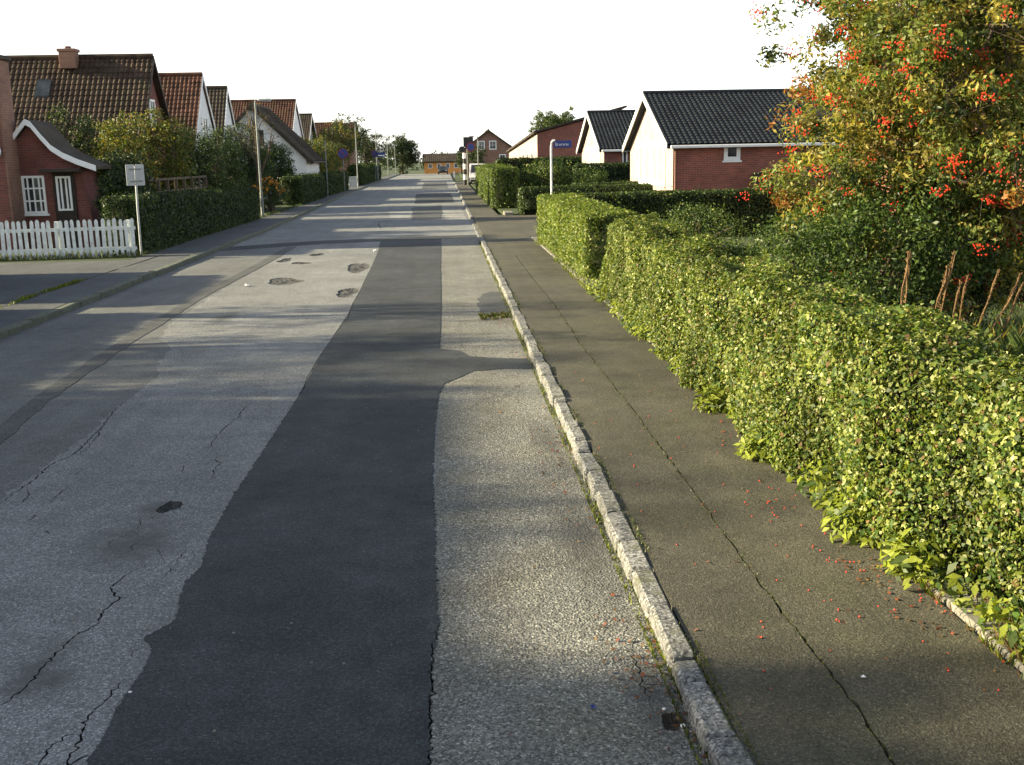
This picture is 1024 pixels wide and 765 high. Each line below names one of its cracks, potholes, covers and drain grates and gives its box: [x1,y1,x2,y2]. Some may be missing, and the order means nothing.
crack [1,520,187,705]
crack [630,633,666,704]
pothole [347,263,370,273]
crack [38,682,121,765]
crack [208,402,253,480]
pothole [336,288,359,298]
pothole [156,501,183,513]
